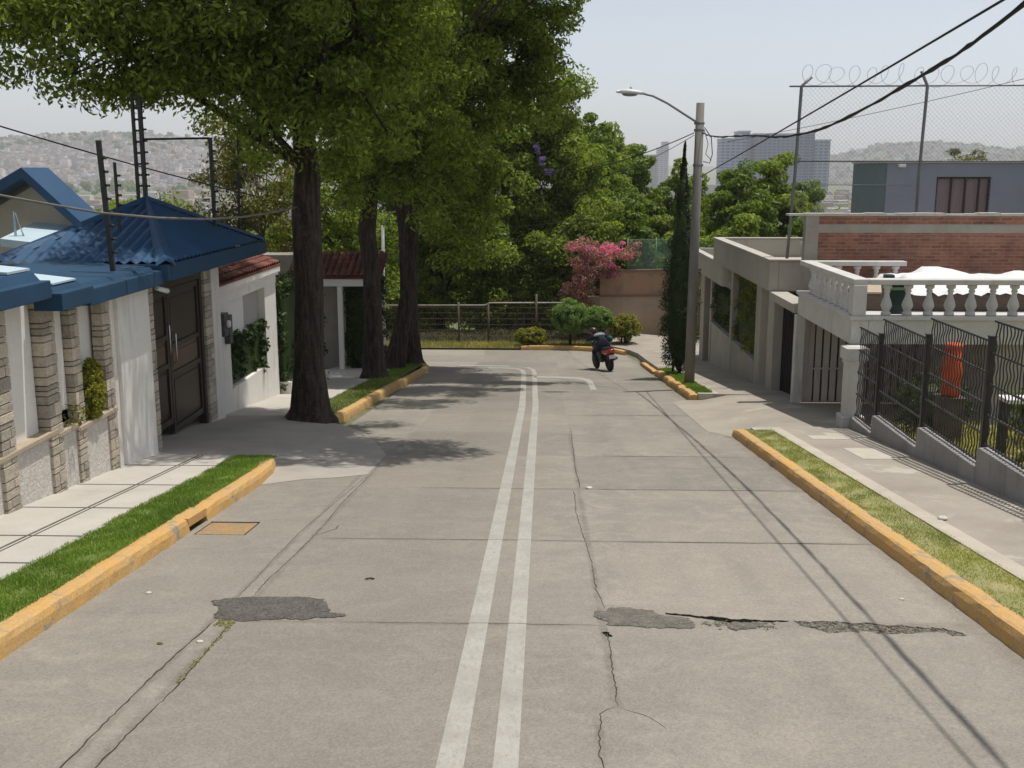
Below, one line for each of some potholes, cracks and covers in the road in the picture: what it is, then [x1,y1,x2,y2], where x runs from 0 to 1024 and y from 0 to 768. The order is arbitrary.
crack [598,628,666,768]
